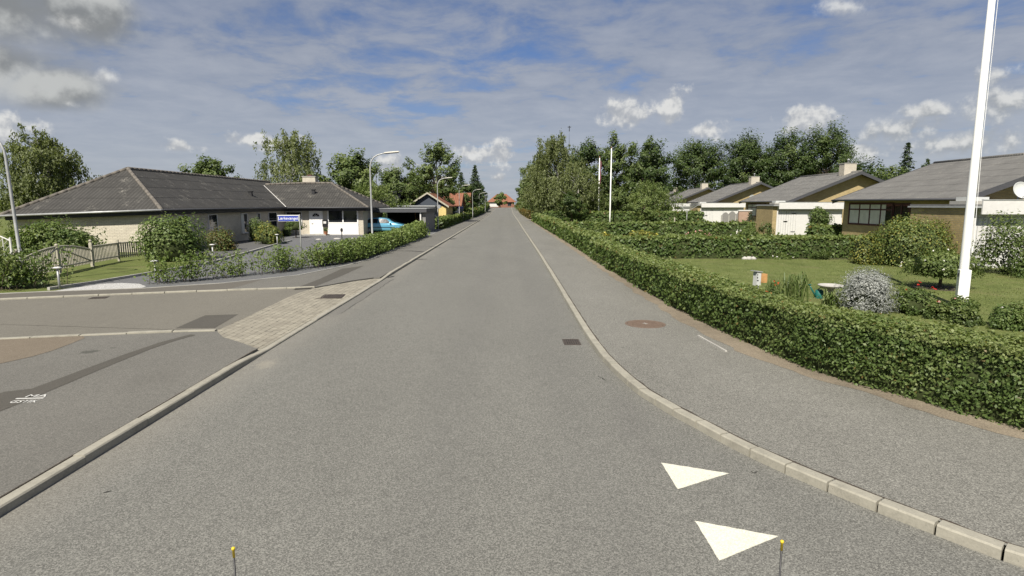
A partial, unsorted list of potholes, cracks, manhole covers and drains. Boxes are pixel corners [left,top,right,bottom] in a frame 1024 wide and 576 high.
manhole cover [625,320,666,328]
